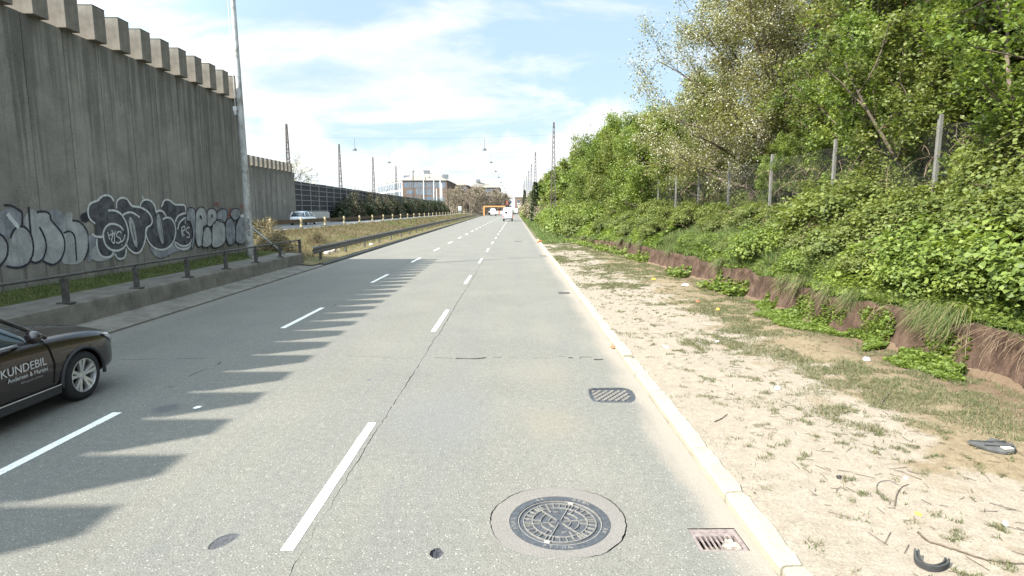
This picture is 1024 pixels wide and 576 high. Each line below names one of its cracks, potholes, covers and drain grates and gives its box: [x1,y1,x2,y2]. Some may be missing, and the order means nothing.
crack [290,268,479,574]
drain grate [688,529,749,551]
manhole cover [491,488,626,558]
